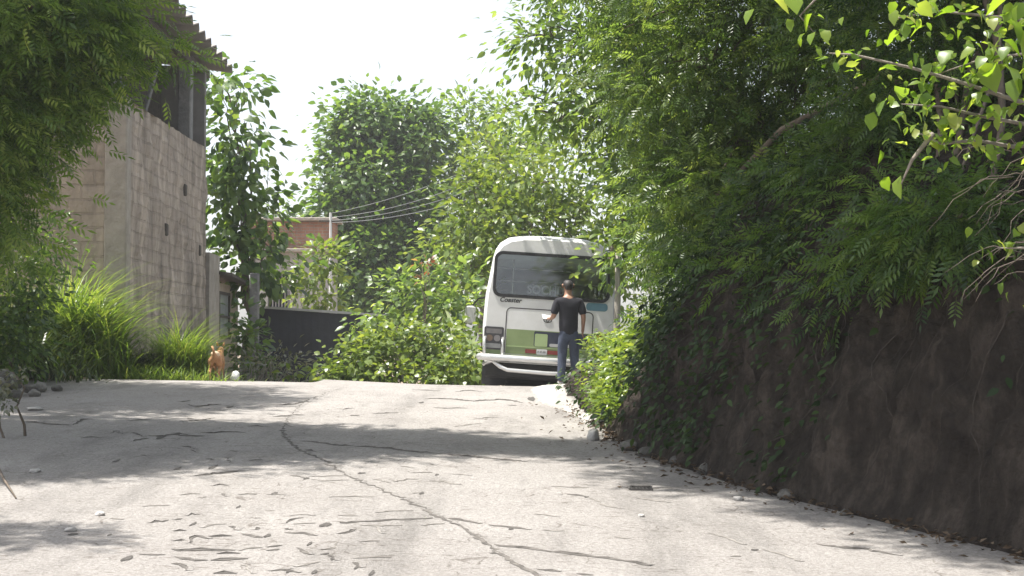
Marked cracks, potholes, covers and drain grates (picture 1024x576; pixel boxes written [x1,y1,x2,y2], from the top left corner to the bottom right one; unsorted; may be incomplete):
crack [25,388,668,576]
